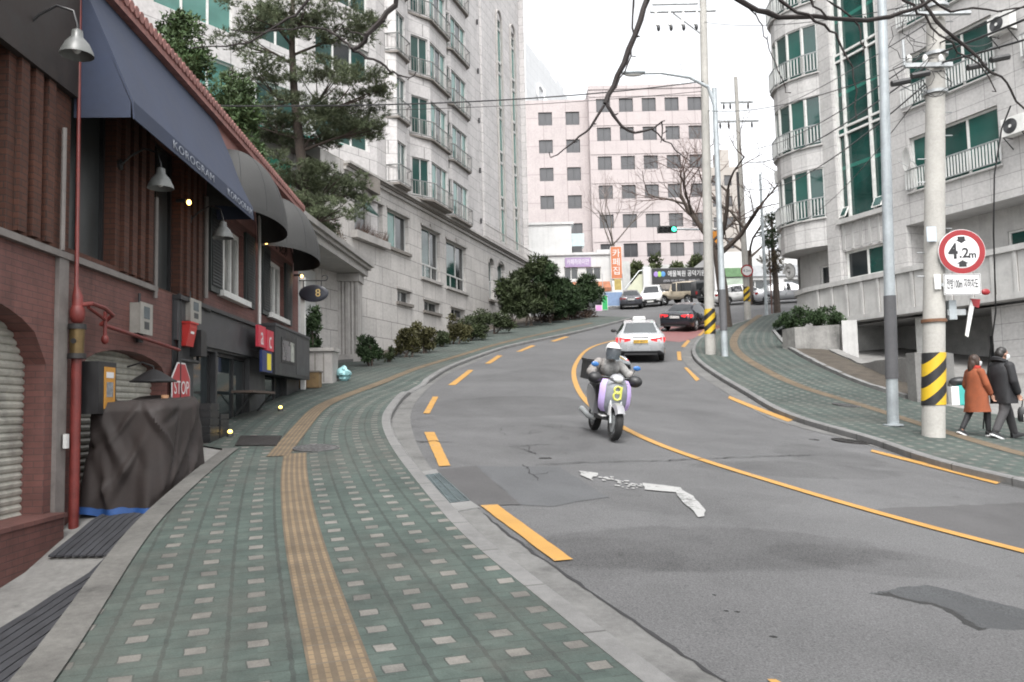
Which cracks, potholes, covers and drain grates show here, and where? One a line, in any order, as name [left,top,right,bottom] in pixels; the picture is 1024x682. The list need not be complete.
manhole cover [235,435,282,446]
manhole cover [831,438,871,446]
manhole cover [292,444,339,452]
drain grate [423,469,480,512]
crack [500,424,816,481]
